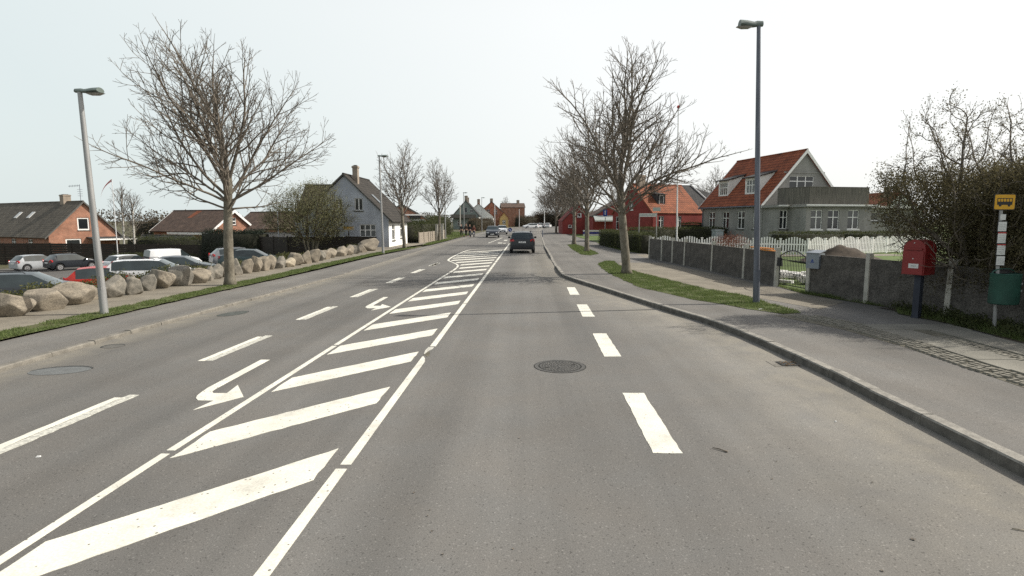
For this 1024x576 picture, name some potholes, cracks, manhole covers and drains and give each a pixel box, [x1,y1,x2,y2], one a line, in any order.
manhole cover [534,360,586,373]
manhole cover [28,366,93,375]
